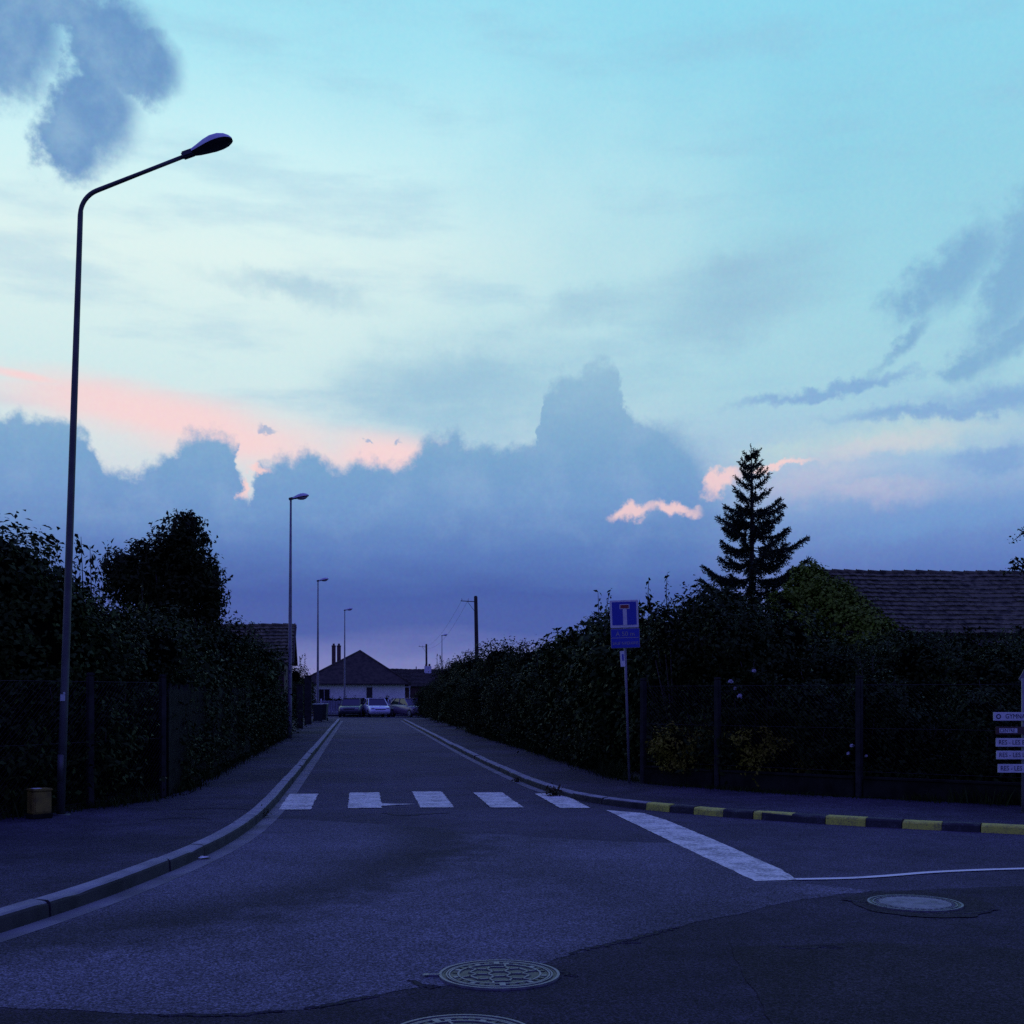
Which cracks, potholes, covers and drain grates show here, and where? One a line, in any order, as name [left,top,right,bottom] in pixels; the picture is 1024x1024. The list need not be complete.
manhole cover [867,895,964,912]
manhole cover [401,1014,525,1024]
manhole cover [423,960,560,991]
